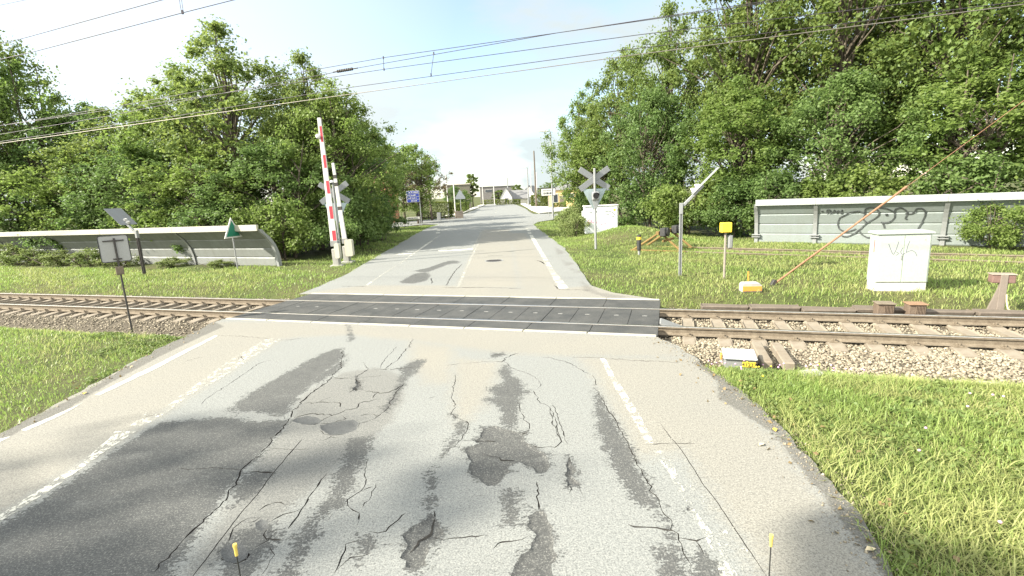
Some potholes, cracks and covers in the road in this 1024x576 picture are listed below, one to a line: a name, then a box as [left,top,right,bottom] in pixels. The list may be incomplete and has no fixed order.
crack [156,342,528,576]
crack [549,357,706,574]
crack [431,353,571,462]
